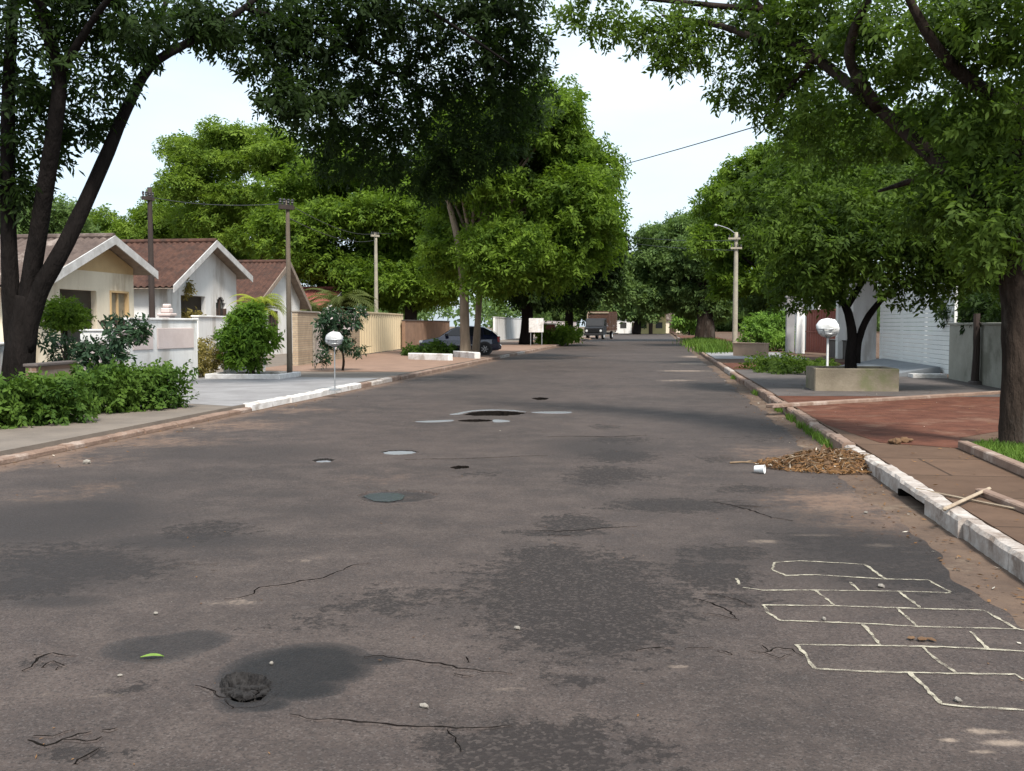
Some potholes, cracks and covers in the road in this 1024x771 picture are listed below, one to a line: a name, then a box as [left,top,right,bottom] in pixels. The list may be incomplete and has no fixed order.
crack [224,563,370,600]
crack [364,655,512,677]
crack [22,652,77,671]
crack [288,714,512,751]
crack [693,593,751,620]
crack [713,502,793,521]
crack [25,728,118,764]
pothole [209,669,283,708]
